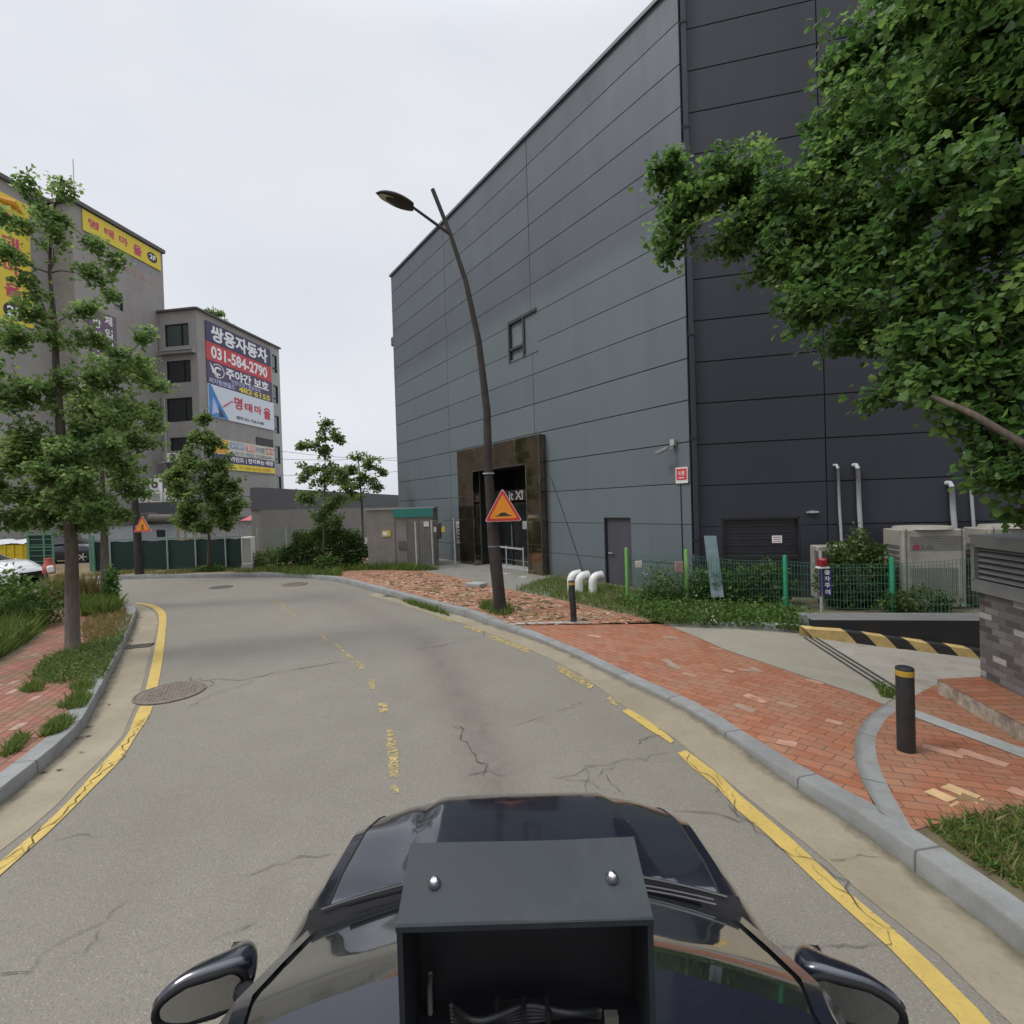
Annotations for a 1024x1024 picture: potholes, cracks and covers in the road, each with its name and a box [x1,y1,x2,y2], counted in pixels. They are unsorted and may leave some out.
crack [0,899,128,974]
manhole cover [131,681,206,706]
crack [454,725,506,775]
crack [176,662,333,704]
crack [557,735,668,796]
